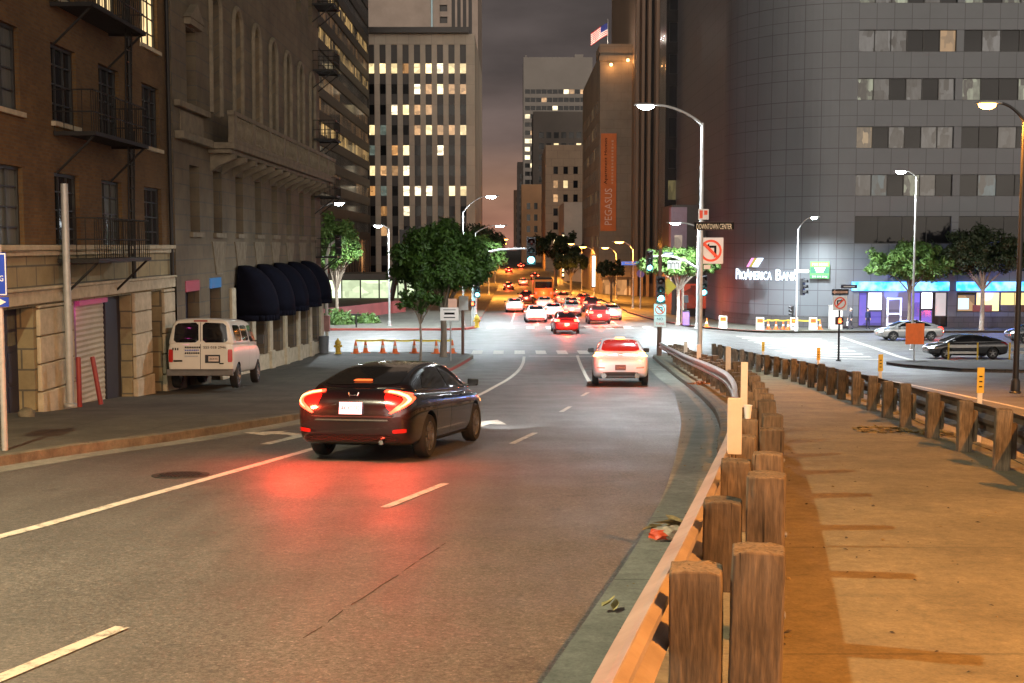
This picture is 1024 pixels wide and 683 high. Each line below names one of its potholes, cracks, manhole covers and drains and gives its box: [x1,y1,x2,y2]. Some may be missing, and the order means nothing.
manhole cover [151,471,210,479]
crack [303,543,445,638]
